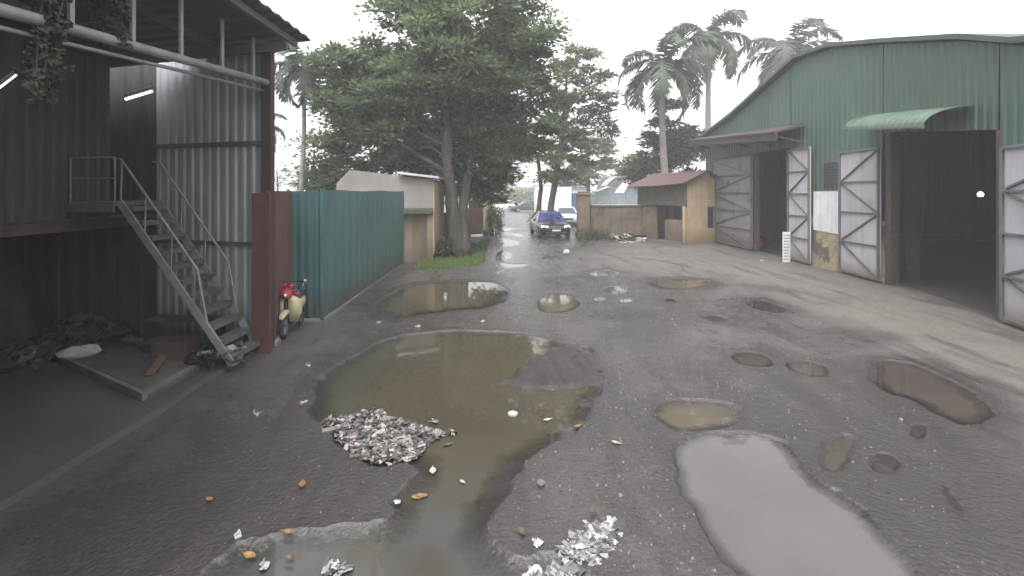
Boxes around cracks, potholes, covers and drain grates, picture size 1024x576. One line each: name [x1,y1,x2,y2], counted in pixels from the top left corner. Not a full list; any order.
pothole [646,278,714,289]
pothole [729,351,776,367]
pothole [670,430,921,576]
pothole [906,420,931,440]
pothole [491,249,515,262]
pothole [534,293,582,313]
pothole [195,329,606,576]
pothole [745,299,790,313]
pothole [865,359,1001,425]
pothole [783,360,833,377]
pothole [650,397,748,431]
pothole [372,281,511,319]
